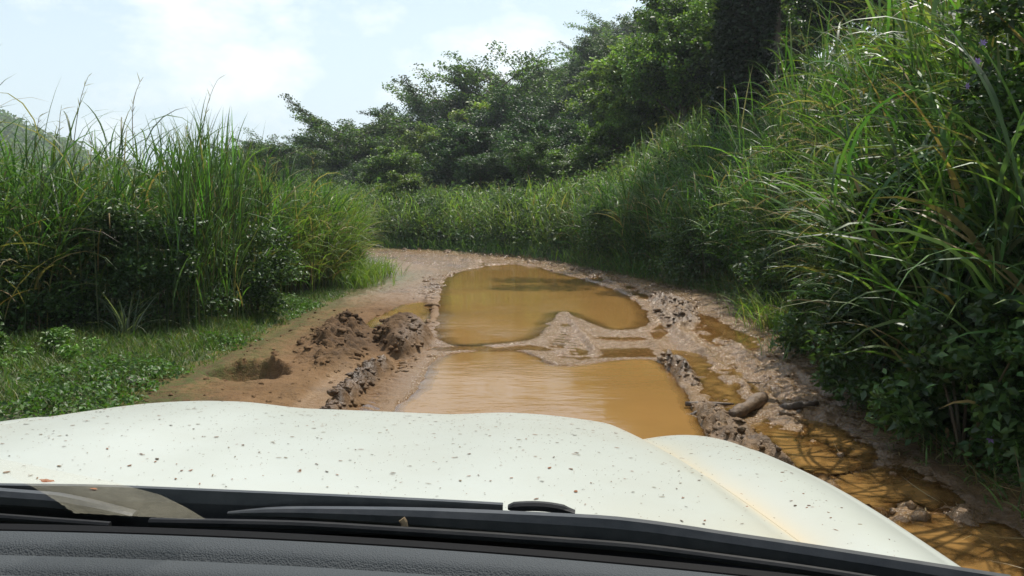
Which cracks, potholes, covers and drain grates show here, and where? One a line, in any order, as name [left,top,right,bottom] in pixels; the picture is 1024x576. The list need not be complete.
pothole [387,348,758,439]
pothole [429,263,655,349]
pothole [195,354,298,384]
